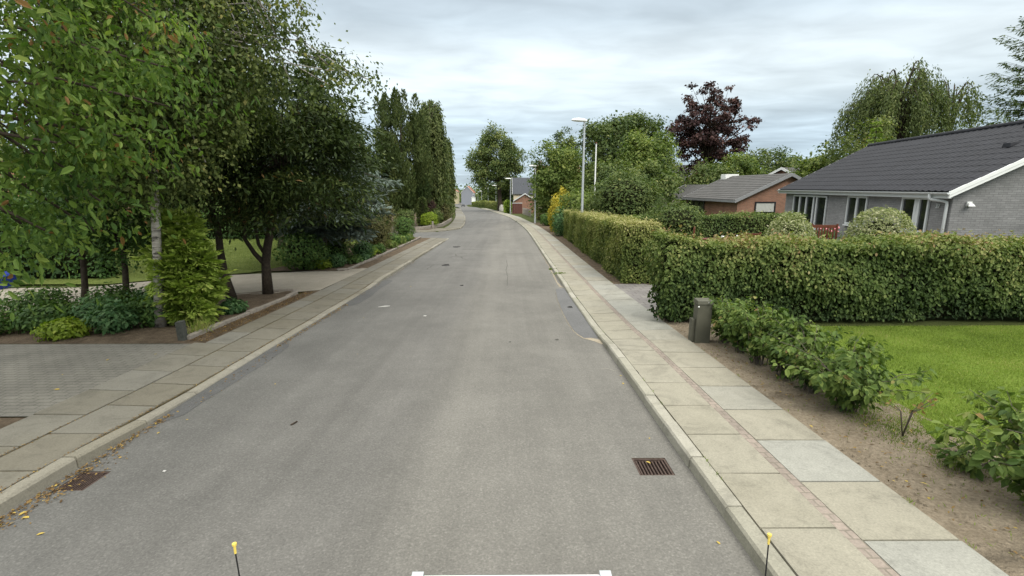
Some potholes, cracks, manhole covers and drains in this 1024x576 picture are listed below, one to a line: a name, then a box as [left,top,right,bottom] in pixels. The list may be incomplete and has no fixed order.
drain grate [632,458,675,475]
drain grate [56,472,110,491]
